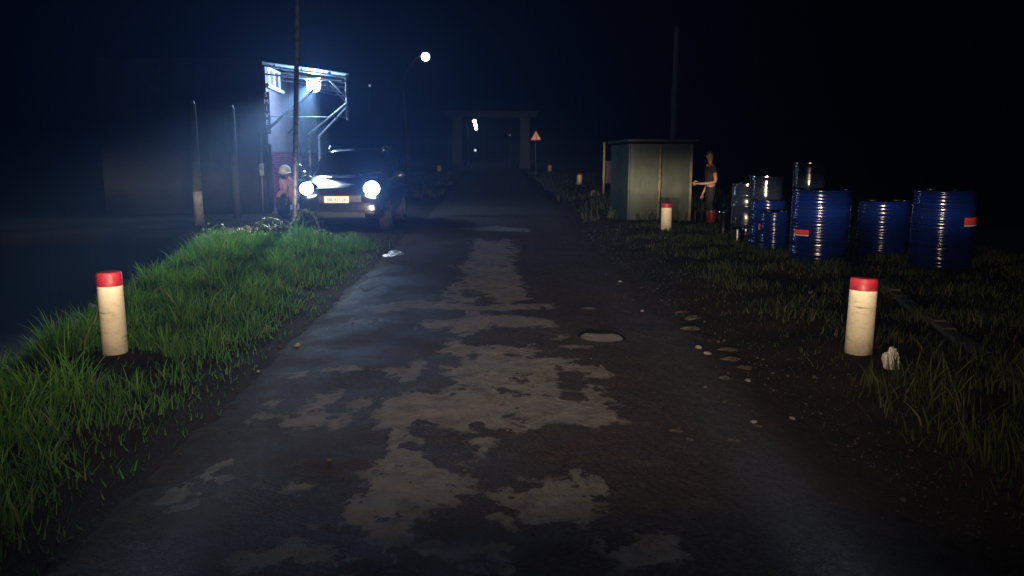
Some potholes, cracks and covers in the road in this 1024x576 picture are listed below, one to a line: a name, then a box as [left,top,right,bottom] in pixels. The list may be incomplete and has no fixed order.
pothole [572,329,631,345]
